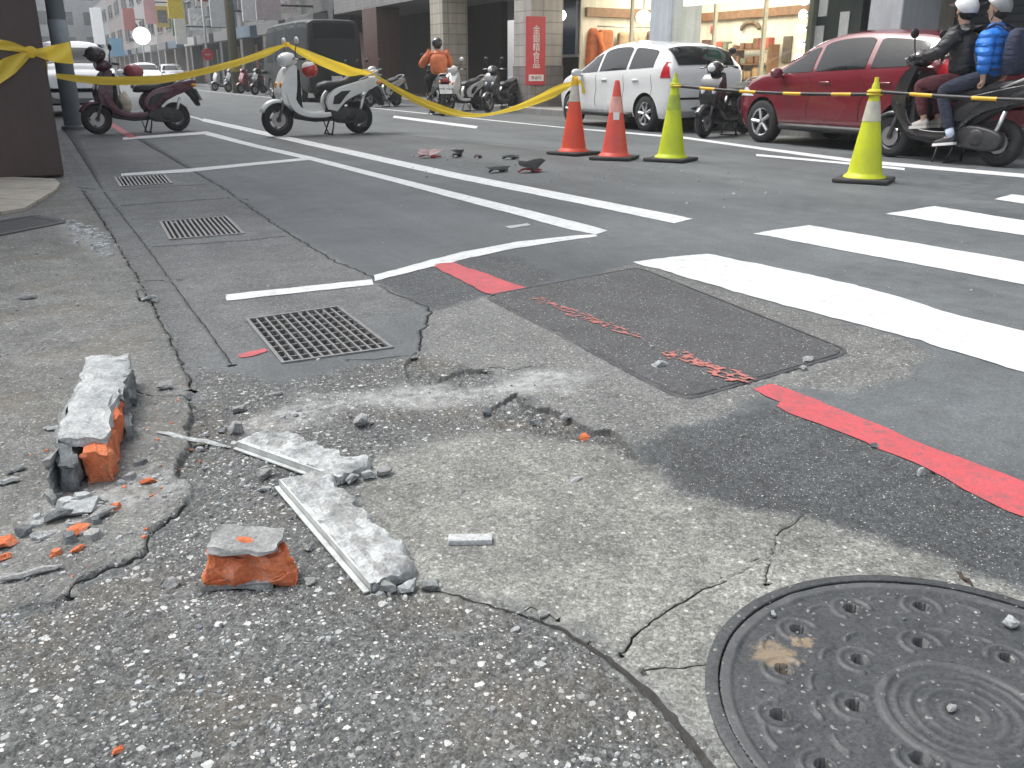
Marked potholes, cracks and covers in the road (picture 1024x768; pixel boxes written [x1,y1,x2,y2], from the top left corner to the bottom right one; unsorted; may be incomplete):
manhole cover [705,575,1024,768]
crack [136,390,191,401]
drain grate [245,305,394,364]
pothole [480,391,643,465]
crack [416,514,809,768]
drain grate [159,216,245,240]
drain grate [114,174,173,187]
crack [61,502,192,598]
crack [118,135,438,362]
pothole [399,350,498,392]
